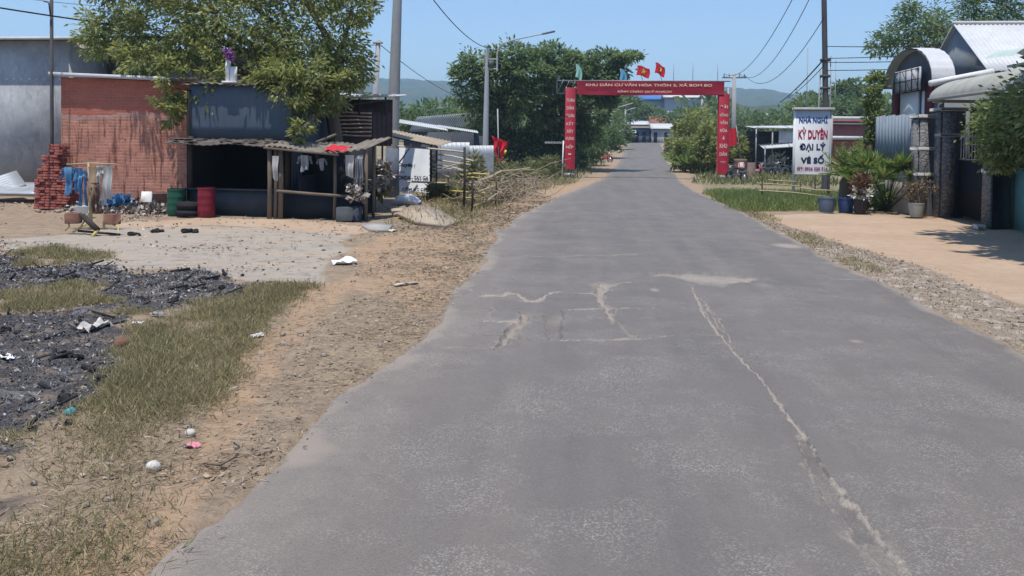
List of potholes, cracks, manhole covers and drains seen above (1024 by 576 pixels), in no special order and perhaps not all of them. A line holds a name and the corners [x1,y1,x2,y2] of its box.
crack [441,277,1014,576]
